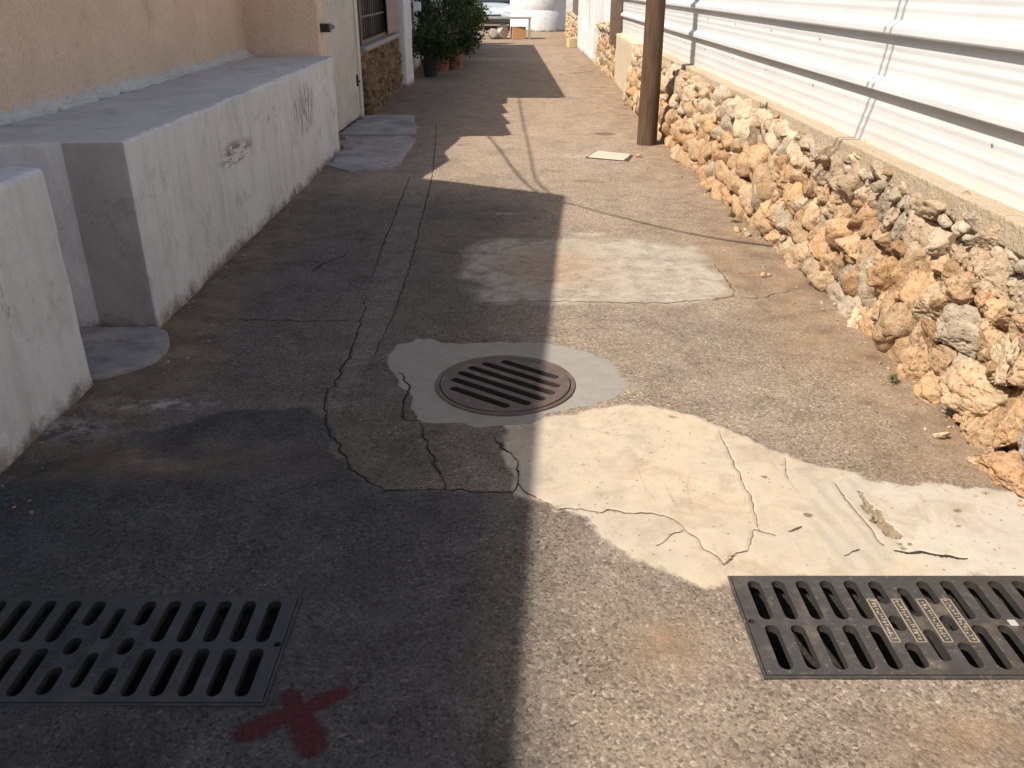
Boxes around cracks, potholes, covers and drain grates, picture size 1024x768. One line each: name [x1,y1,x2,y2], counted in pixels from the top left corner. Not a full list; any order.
drain grate [727,576,1024,680]
drain grate [0,595,302,707]
manhole cover [435,355,575,416]
crack [237,297,802,565]
manhole cover [585,151,633,162]
crack [835,483,968,560]
